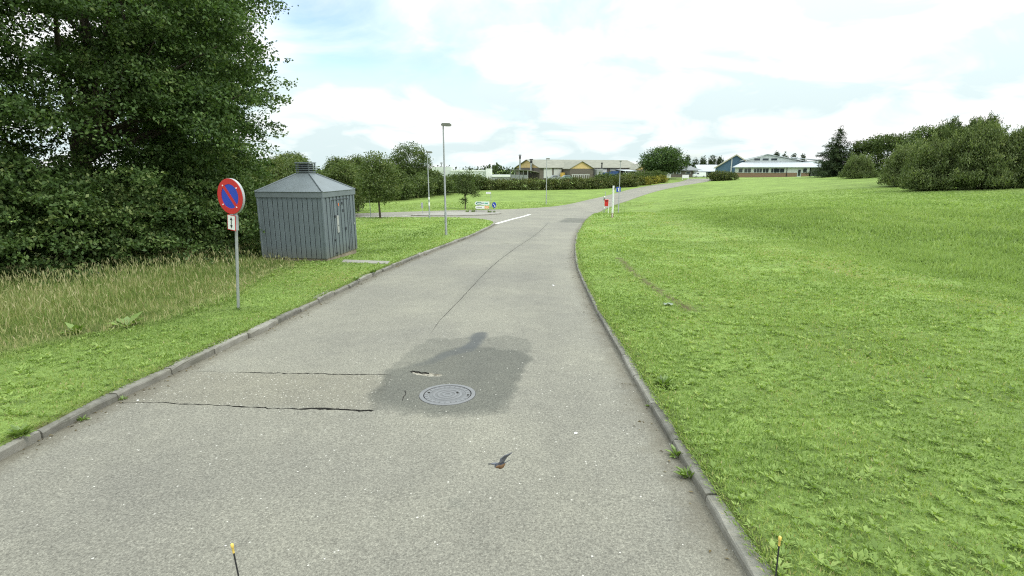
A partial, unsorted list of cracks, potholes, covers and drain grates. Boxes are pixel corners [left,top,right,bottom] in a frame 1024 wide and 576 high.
crack [199,367,406,401]
crack [433,224,547,330]
crack [119,402,374,412]
manhole cover [419,384,475,406]
